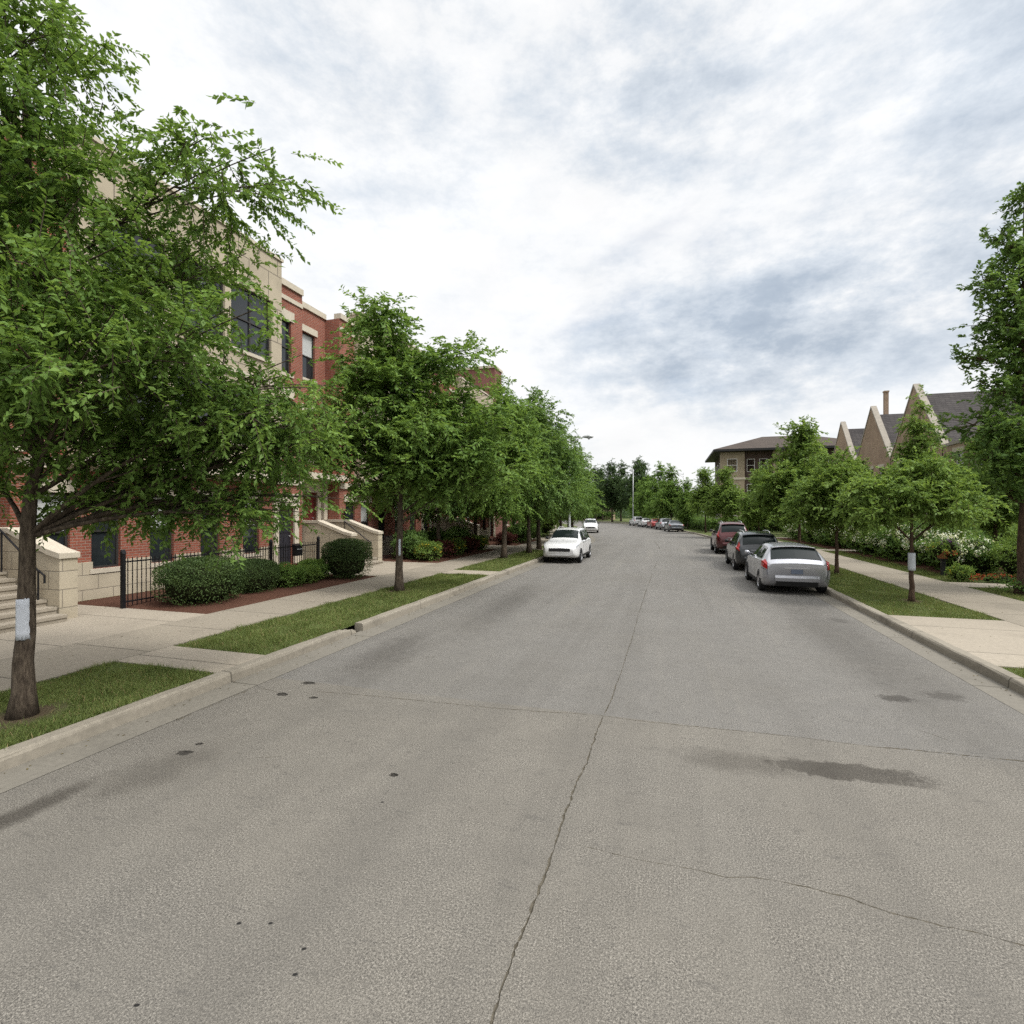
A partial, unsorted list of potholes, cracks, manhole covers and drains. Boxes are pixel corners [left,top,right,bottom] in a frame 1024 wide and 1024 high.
crack [261,546,1024,1024]
